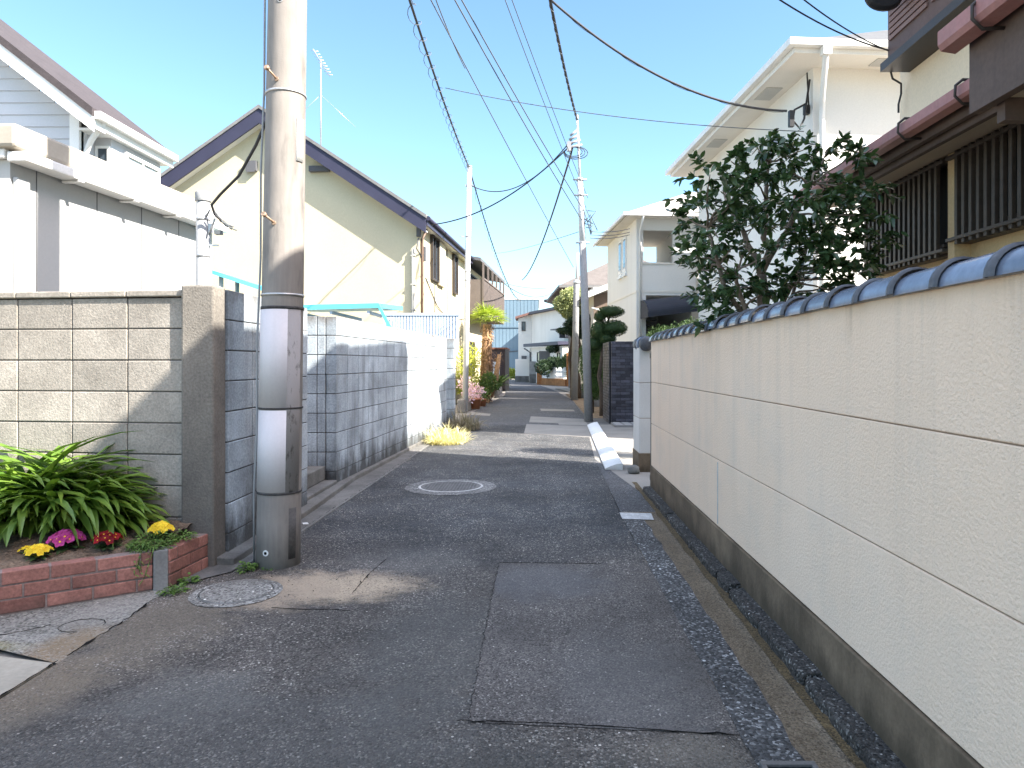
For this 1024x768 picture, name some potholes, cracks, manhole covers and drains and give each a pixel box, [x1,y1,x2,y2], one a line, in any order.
manhole cover [405,479,496,495]
manhole cover [188,579,283,607]
